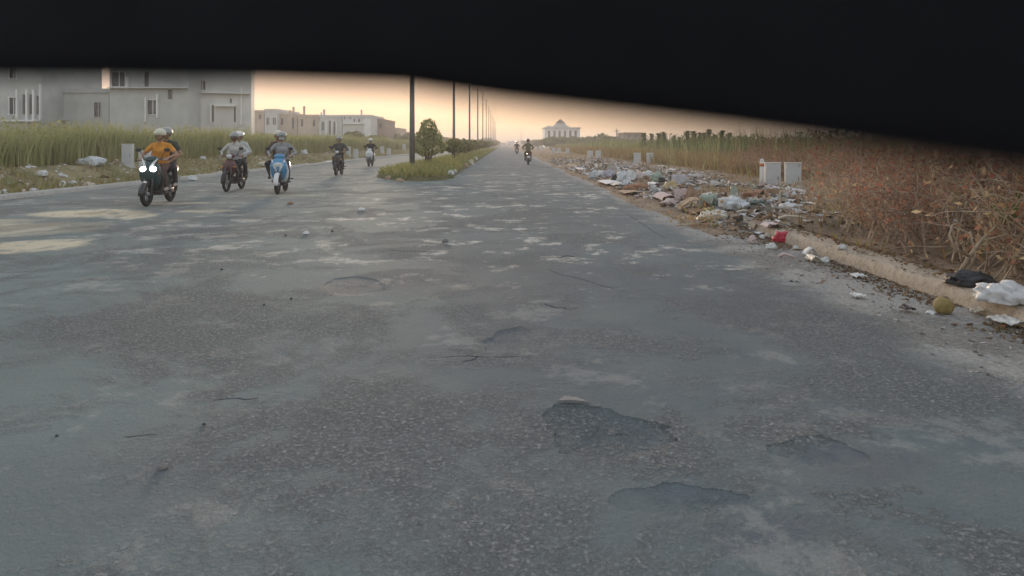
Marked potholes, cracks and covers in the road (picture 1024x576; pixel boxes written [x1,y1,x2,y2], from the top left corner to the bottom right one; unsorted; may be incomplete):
pothole [482,326,532,354]
crack [549,255,624,291]
pothole [542,403,679,464]
pothole [766,435,874,469]
pothole [323,276,385,296]
pothole [608,482,751,522]
